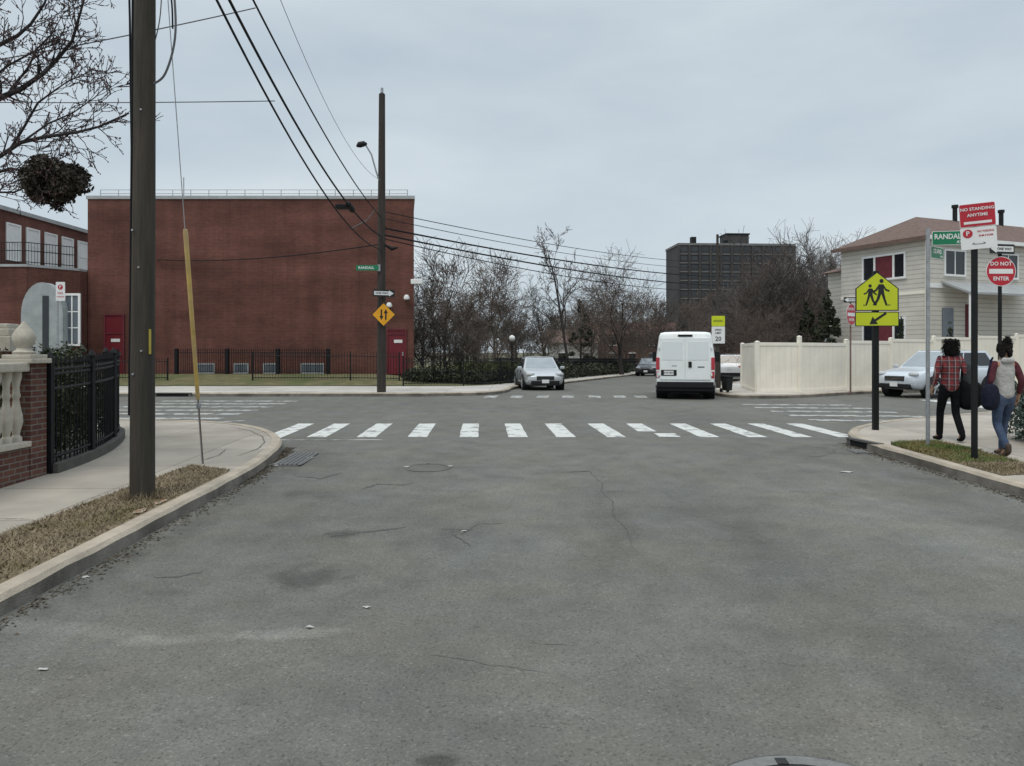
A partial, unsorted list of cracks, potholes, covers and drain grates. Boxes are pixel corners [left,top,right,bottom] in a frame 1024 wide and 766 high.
manhole cover [404,463,452,472]
manhole cover [727,755,855,766]
crack [558,471,637,545]
drain grate [270,452,318,467]
crack [325,527,404,537]
